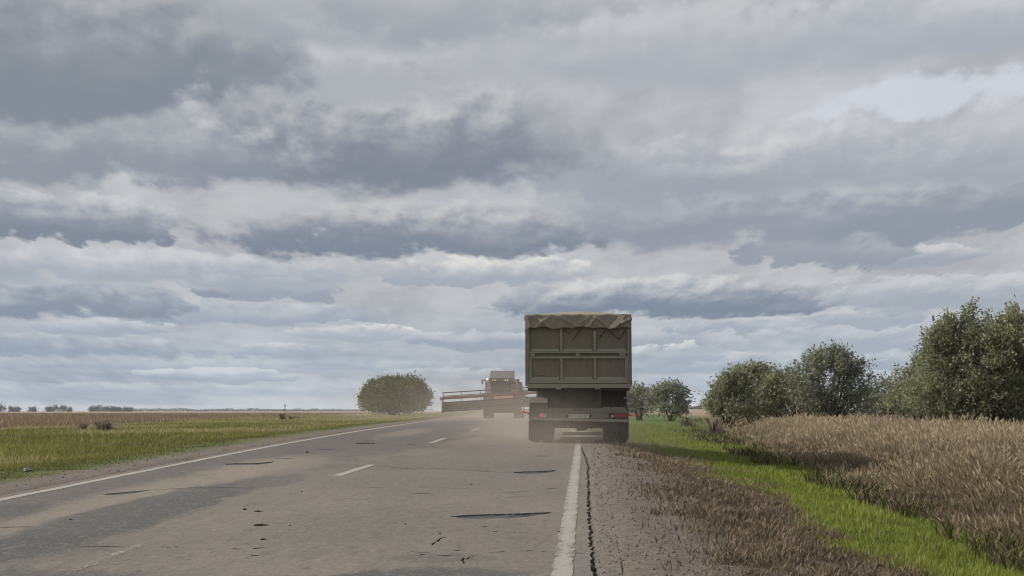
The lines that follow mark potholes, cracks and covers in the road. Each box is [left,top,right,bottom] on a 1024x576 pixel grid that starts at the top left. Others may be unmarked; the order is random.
crack [411,447,600,576]
